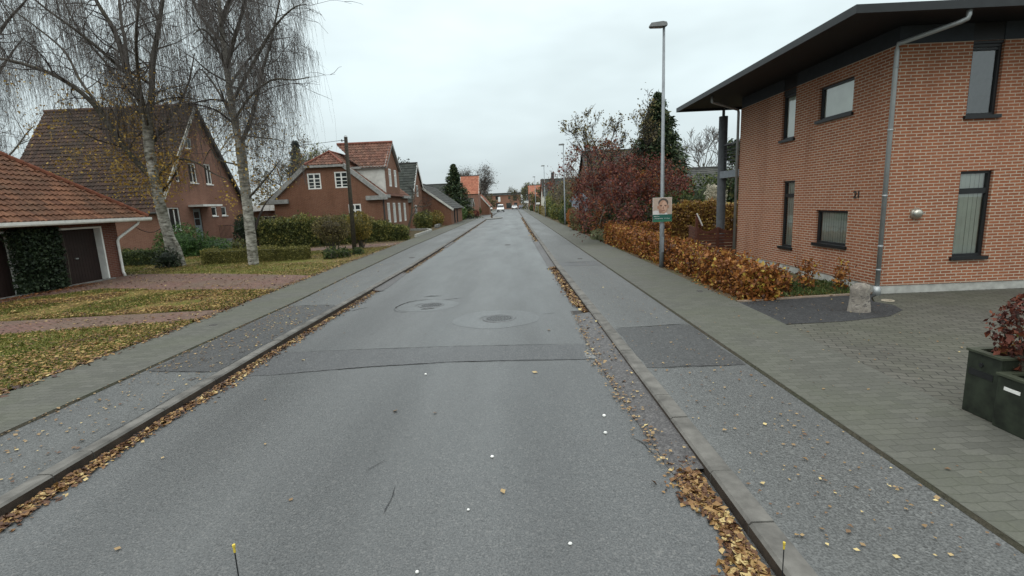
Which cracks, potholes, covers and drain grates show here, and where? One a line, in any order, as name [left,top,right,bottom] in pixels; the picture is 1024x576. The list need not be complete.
manhole cover [482,314,516,322]
